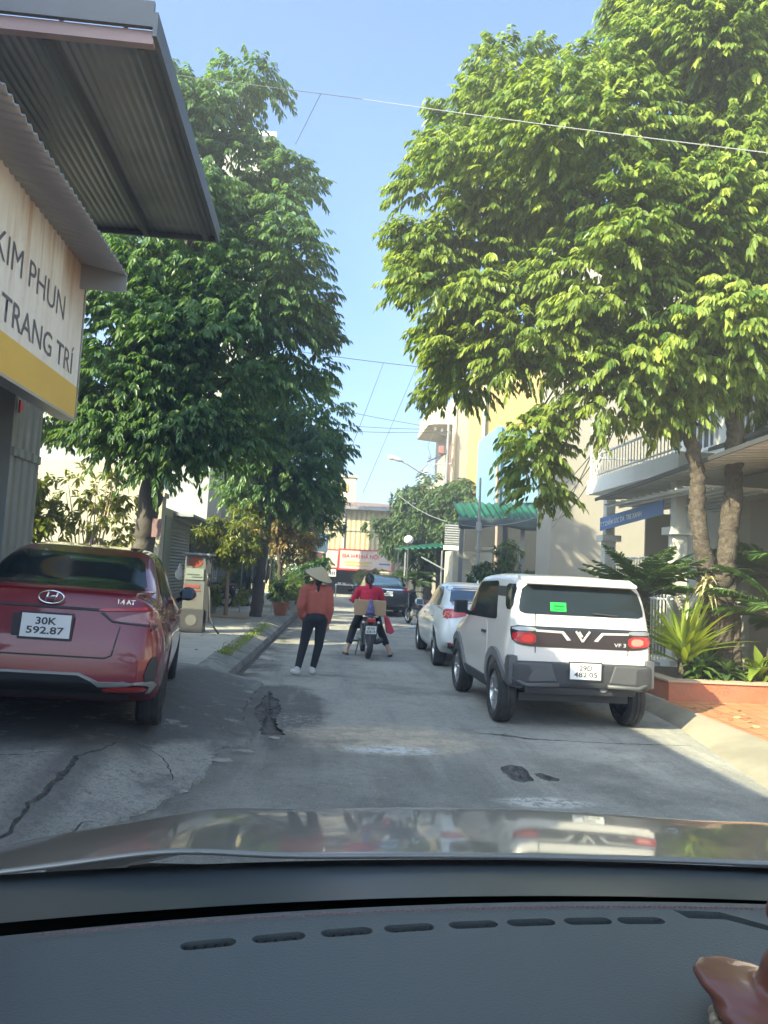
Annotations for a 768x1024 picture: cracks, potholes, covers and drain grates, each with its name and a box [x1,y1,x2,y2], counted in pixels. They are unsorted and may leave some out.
crack [479,733,685,746]
crack [0,742,173,839]
pothole [535,773,560,781]
pothole [254,691,286,736]
pothole [500,765,534,783]
